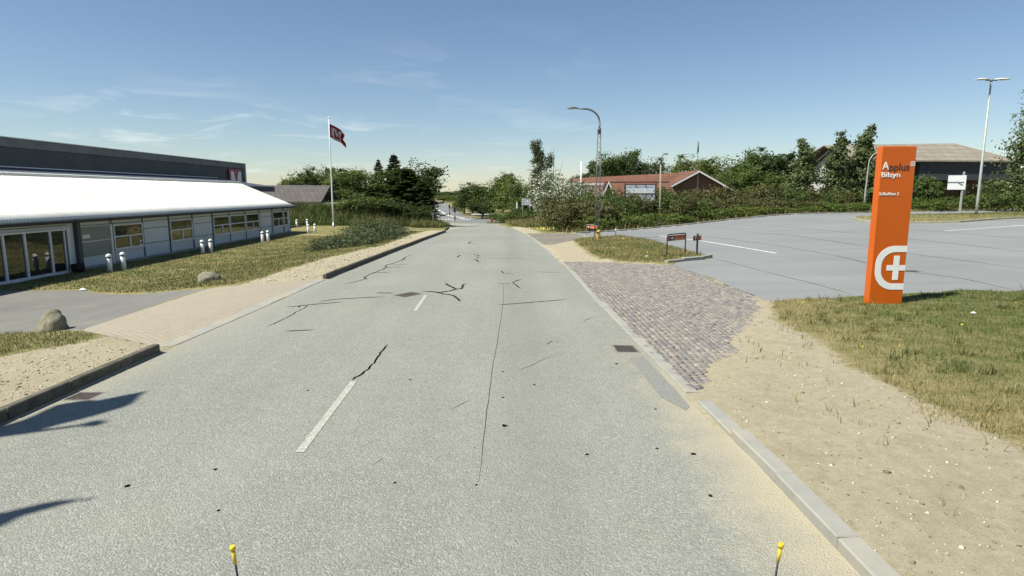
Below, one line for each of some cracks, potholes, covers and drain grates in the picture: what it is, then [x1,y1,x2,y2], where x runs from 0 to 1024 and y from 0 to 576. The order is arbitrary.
crack [351,344,388,381]
crack [497,249,566,305]
drain grate [611,345,641,353]
drain grate [60,392,106,401]
crack [267,255,410,331]
crack [423,283,465,302]
